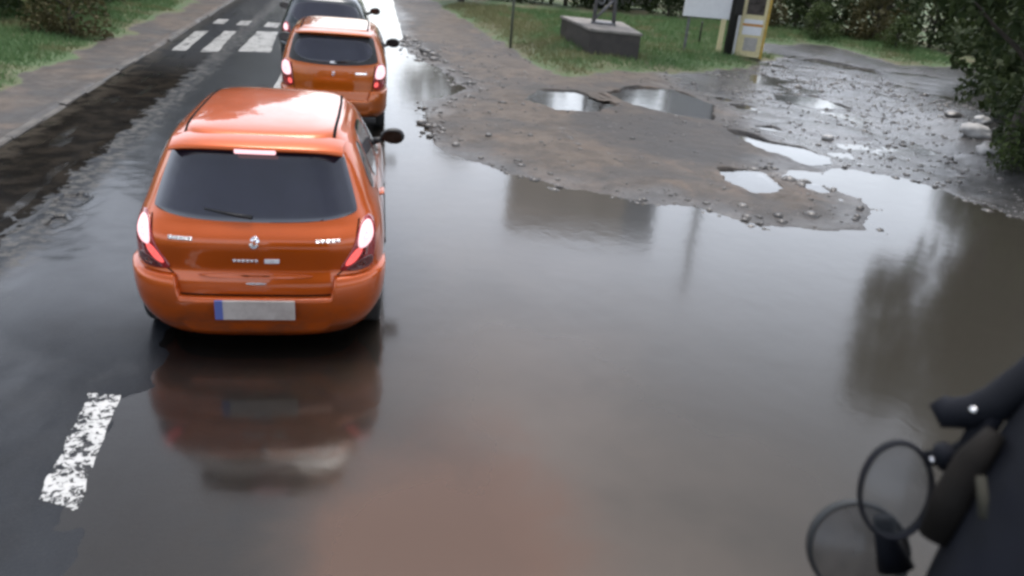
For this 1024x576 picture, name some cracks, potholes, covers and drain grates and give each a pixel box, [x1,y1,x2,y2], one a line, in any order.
pothole [720,127,842,170]
pothole [599,84,723,122]
pothole [709,163,795,198]
pothole [516,87,629,114]
pothole [766,92,860,111]
